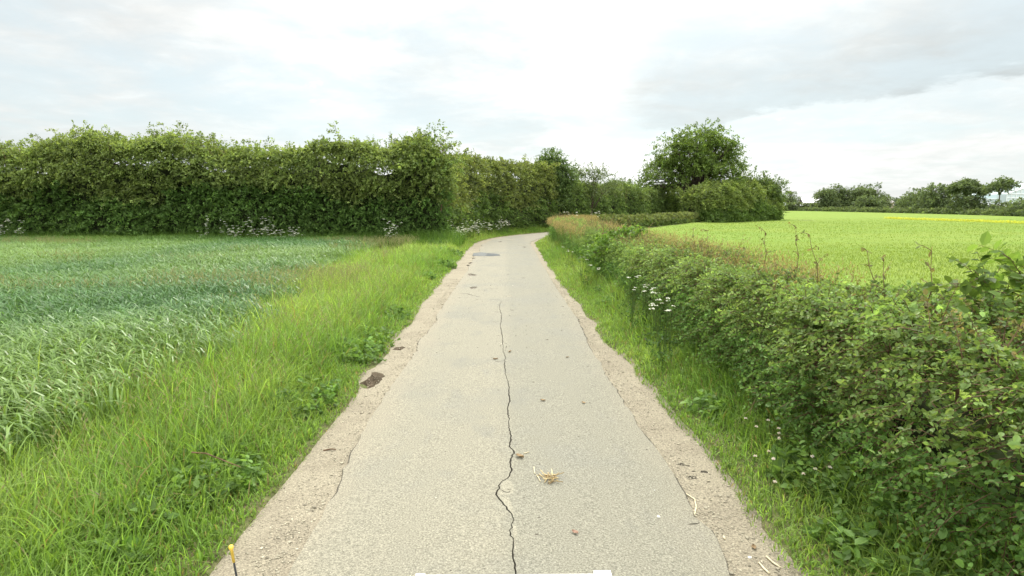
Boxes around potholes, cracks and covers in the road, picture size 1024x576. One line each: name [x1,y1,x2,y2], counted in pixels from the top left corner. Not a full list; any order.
crack [331,434,361,499]
crack [463,288,517,574]
pothole [360,372,385,389]
